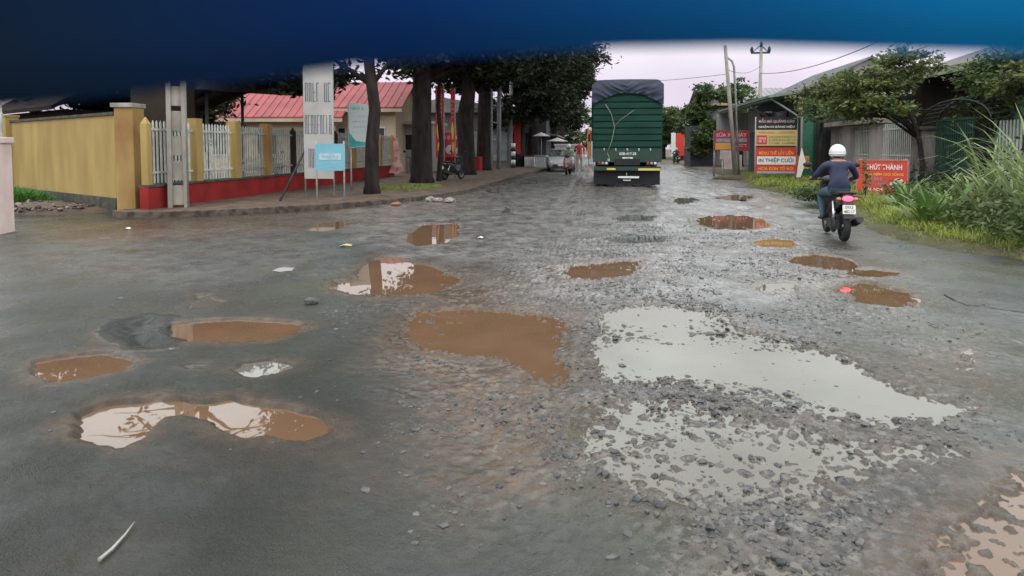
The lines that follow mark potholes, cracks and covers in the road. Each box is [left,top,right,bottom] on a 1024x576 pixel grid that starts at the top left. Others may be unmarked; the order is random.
pothole [779,251,864,271]
pothole [223,357,302,379]
pothole [559,298,1015,434]
pothole [170,316,316,344]
pothole [21,348,147,384]
pothole [316,254,477,300]
pothole [56,389,343,453]
pothole [530,384,1006,537]
pothole [836,266,908,278]
pothole [686,214,780,232]
pothole [303,220,354,232]
